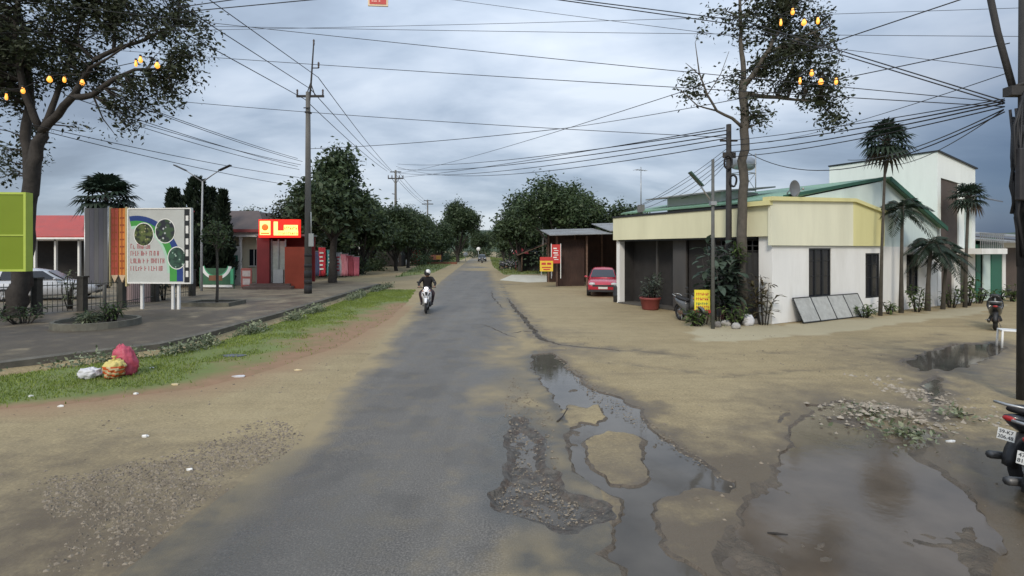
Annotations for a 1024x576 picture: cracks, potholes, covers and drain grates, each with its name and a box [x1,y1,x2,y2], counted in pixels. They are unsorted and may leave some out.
pothole [530,353,736,576]
crack [485,293,640,353]
pothole [487,417,617,535]
pothole [898,342,1008,371]
